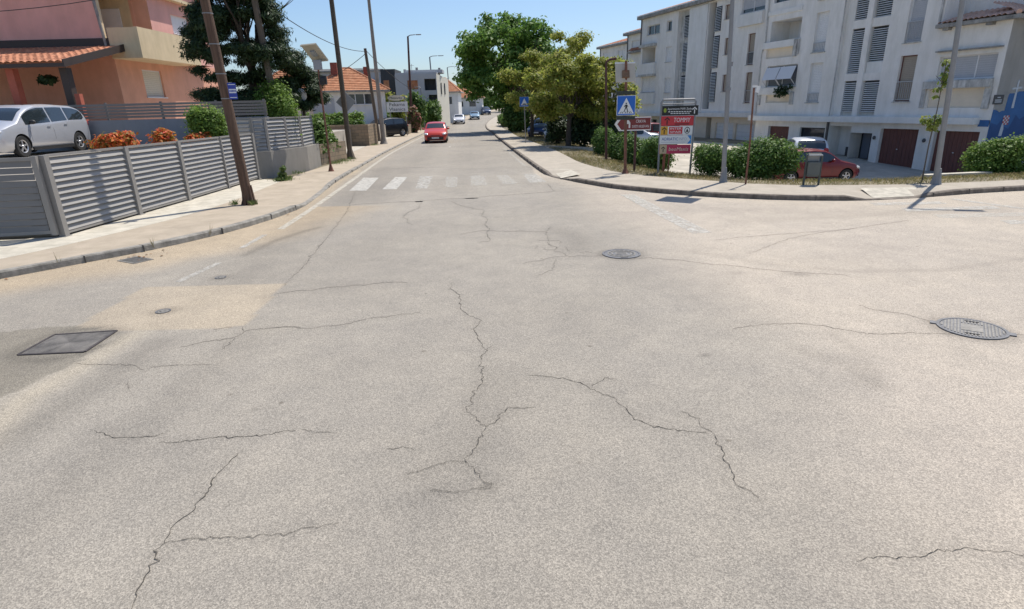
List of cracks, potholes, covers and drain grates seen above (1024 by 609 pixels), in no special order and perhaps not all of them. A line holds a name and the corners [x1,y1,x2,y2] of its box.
crack [861,547,1022,561]
crack [94,429,338,607]
crack [531,375,759,497]
crack [733,305,1021,335]
manhole cover [602,249,641,259]
manhole cover [17,330,118,356]
crack [410,287,533,492]
crack [182,313,414,349]
manhole cover [930,317,1017,340]
